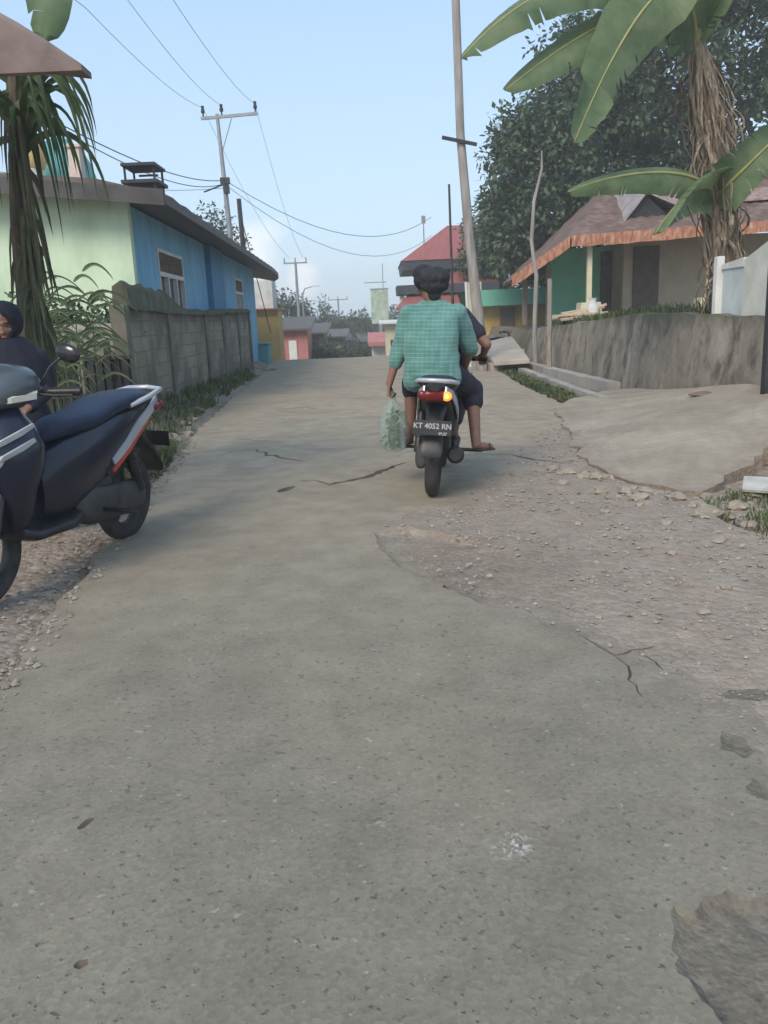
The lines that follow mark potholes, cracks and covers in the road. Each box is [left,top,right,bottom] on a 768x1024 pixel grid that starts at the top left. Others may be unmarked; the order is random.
pothole [374,526,538,606]
pothole [722,689,768,701]
crack [227,439,404,485]
crack [579,635,663,697]
